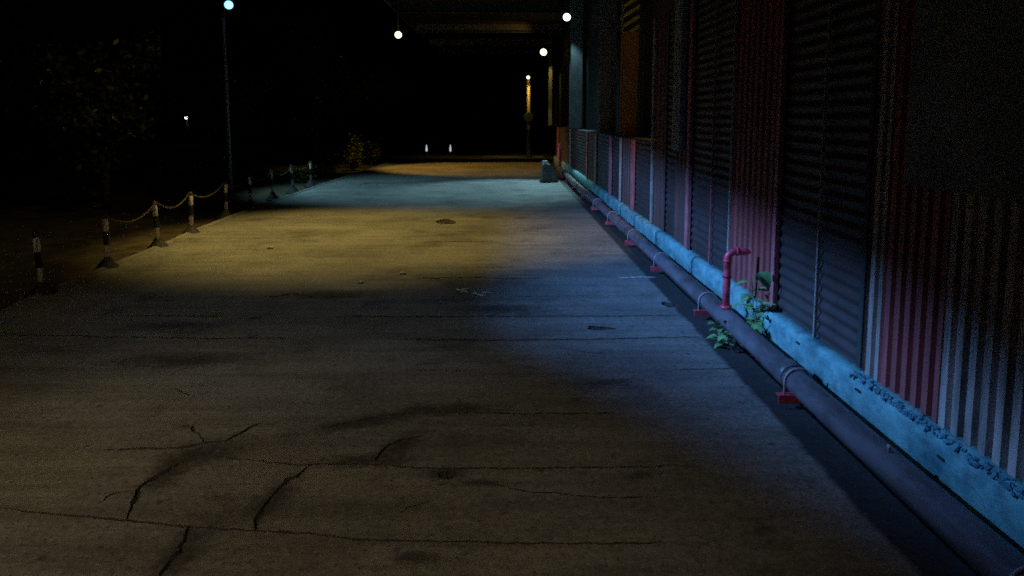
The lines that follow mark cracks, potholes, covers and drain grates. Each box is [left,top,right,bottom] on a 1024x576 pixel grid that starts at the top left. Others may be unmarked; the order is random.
crack [3,411,677,576]
pothole [438,471,457,479]
